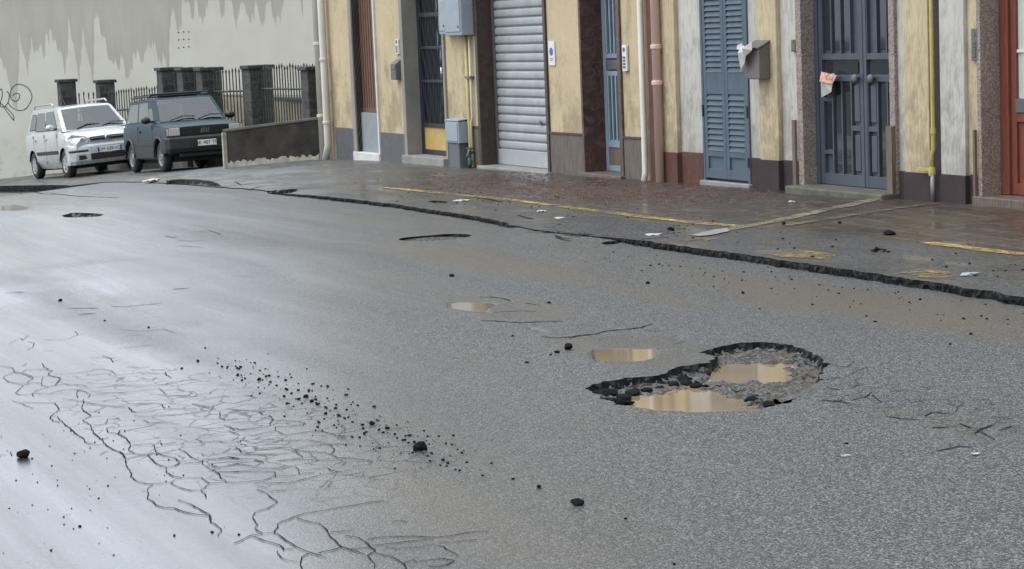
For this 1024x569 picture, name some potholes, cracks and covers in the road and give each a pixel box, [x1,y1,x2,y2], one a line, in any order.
crack [4,329,479,569]
pothole [446,301,500,315]
pothole [680,342,830,403]
pothole [588,347,661,361]
pothole [585,366,784,412]
crack [482,297,681,362]
crack [822,361,1011,451]
